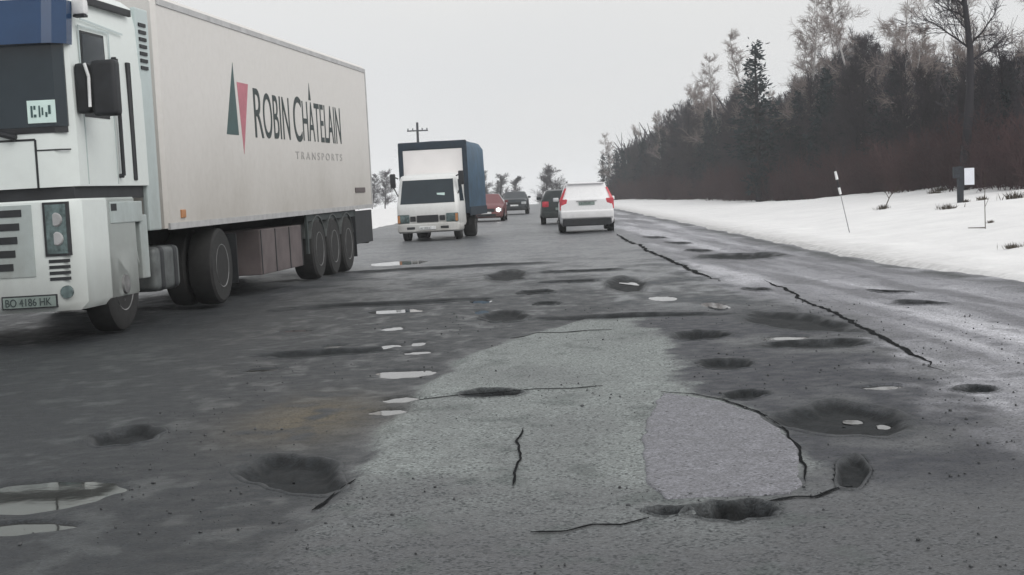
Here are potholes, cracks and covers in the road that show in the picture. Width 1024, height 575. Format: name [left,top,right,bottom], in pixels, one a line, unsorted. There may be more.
pothole [604,275,649,294]
pothole [229,452,350,498]
crack [765,280,944,371]
pothole [834,452,873,491]
pothole [641,505,696,517]
pothole [694,358,755,370]
pothole [86,424,168,448]
pothole [951,384,1001,394]
crack [617,234,719,281]
pothole [764,398,919,439]
crack [770,486,853,501]
pothole [678,498,783,523]
